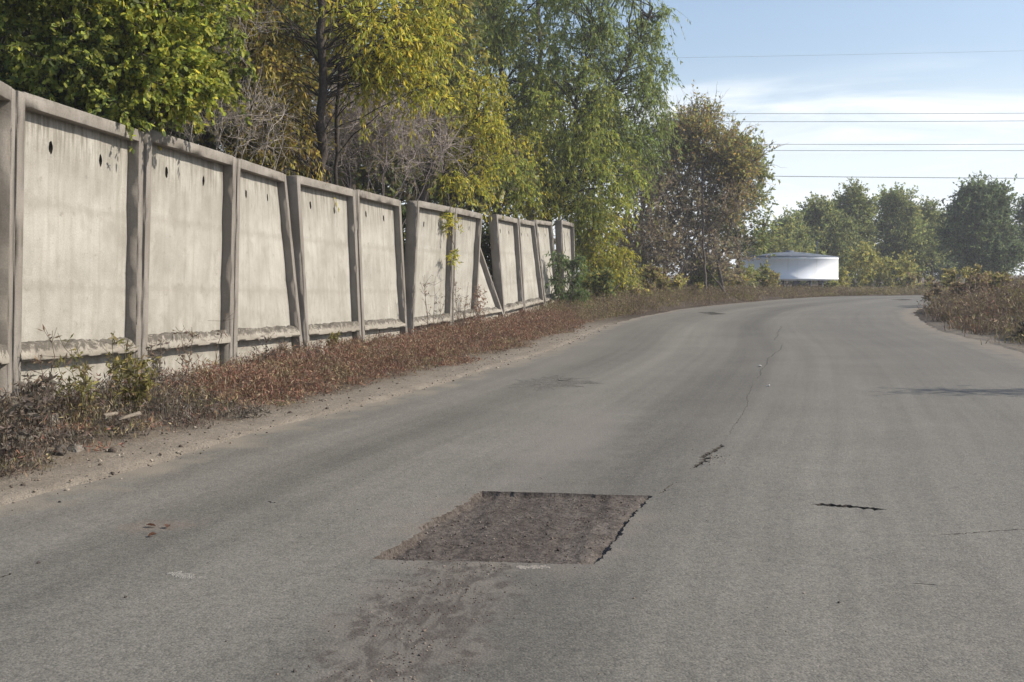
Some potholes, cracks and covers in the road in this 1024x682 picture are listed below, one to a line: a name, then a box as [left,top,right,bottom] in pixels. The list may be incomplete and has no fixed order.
pothole [373,491,653,564]
crack [815,503,886,511]
